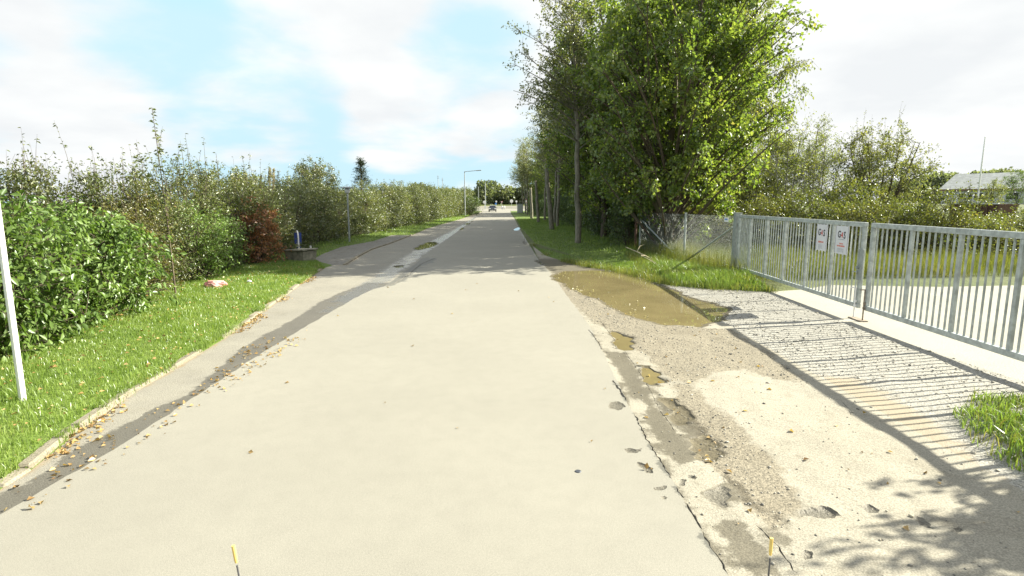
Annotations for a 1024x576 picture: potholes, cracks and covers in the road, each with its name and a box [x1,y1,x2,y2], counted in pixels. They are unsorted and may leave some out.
pothole [608,401,626,410]
pothole [639,365,667,385]
crack [757,526,797,573]
pothole [550,270,733,328]
crack [588,322,728,574]
pothole [609,331,635,351]
